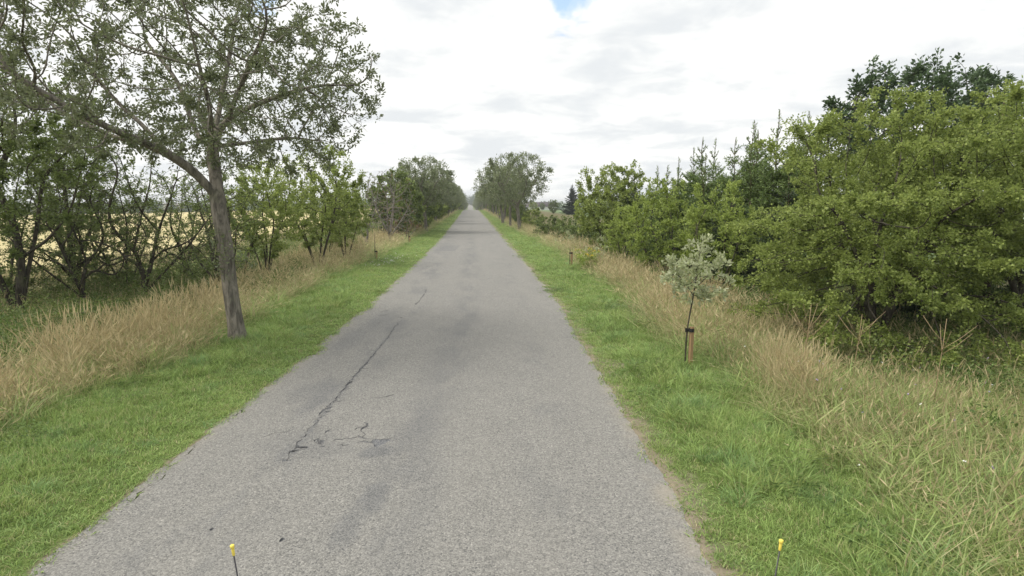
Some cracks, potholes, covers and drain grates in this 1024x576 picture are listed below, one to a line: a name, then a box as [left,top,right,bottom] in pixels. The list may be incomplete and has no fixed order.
crack [278,290,426,462]
